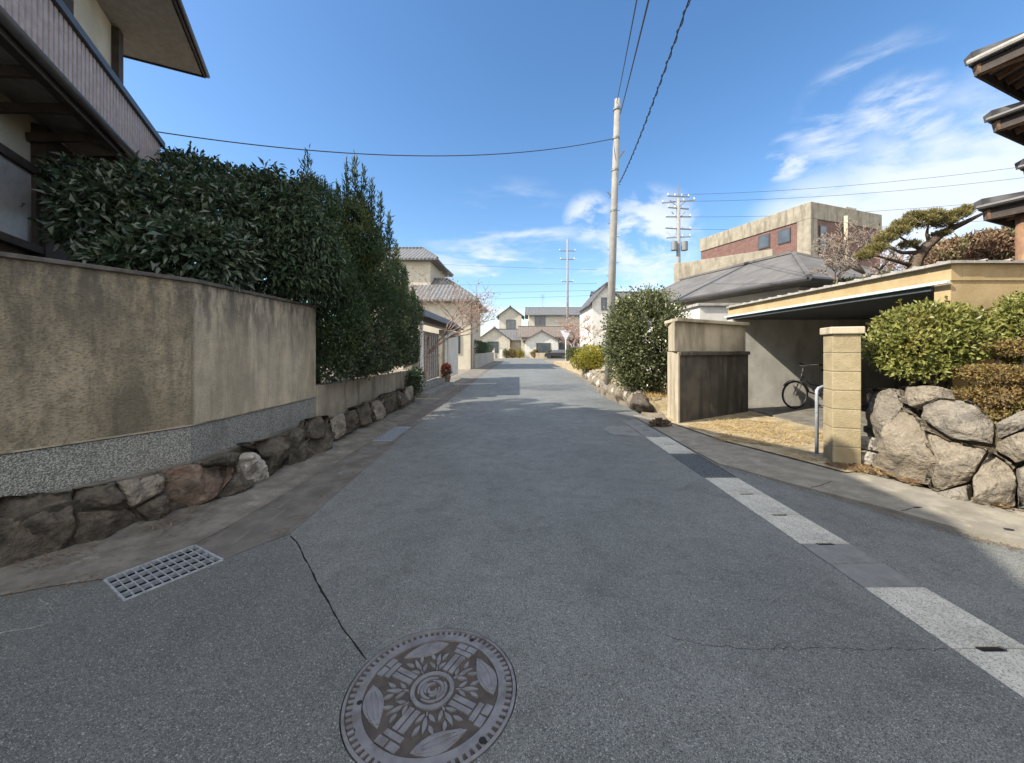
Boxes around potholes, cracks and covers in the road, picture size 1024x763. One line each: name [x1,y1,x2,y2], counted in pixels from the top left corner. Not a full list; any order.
crack [289,535,367,660]
manhole cover [341,629,516,763]
drain grate [373,427,410,441]
drain grate [670,453,738,478]
crack [0,598,56,634]
crack [670,636,944,651]
drain grate [103,544,224,601]
